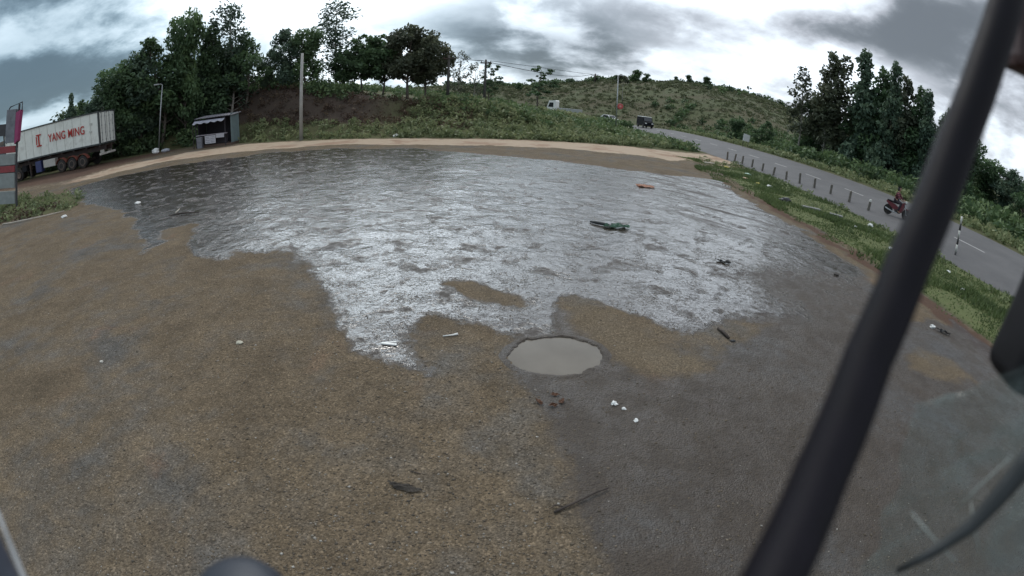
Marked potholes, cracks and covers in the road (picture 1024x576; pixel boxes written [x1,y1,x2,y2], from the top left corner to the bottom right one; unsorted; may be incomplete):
pothole [498,334,612,379]
